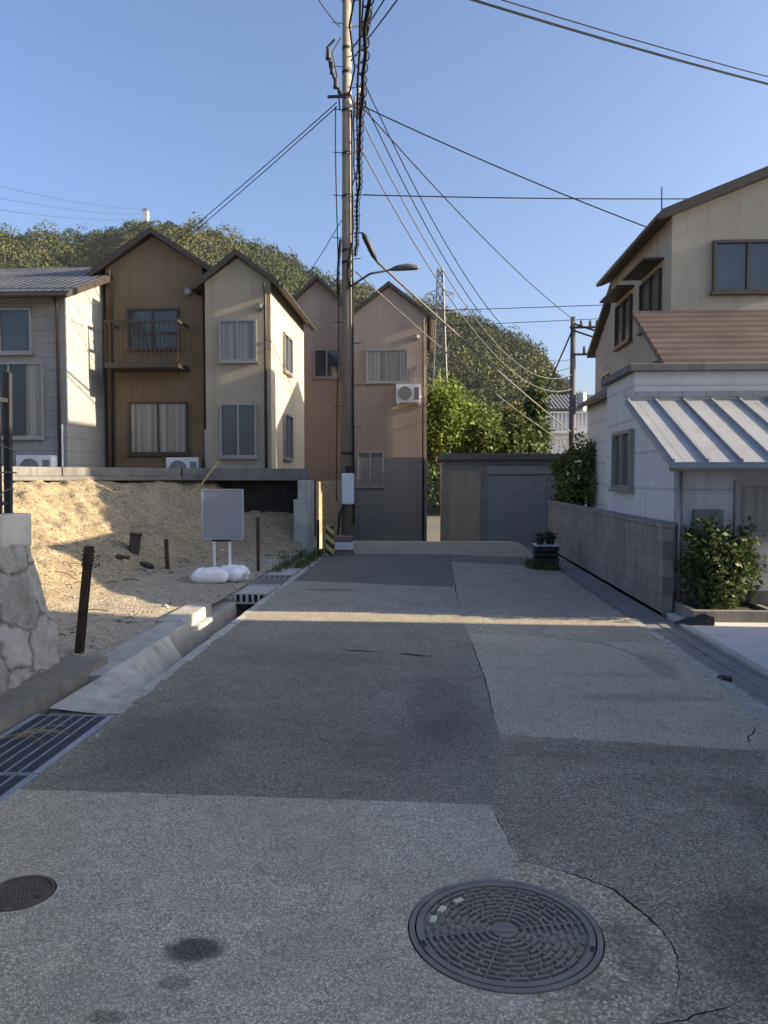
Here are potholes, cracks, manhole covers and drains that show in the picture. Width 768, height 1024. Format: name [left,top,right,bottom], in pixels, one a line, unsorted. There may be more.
crack [532,635,664,667]
drain grate [0,713,37,735]
manhole cover [0,875,56,912]
crack [514,860,739,1024]
drain grate [0,774,38,803]
manhole cover [409,879,604,994]
